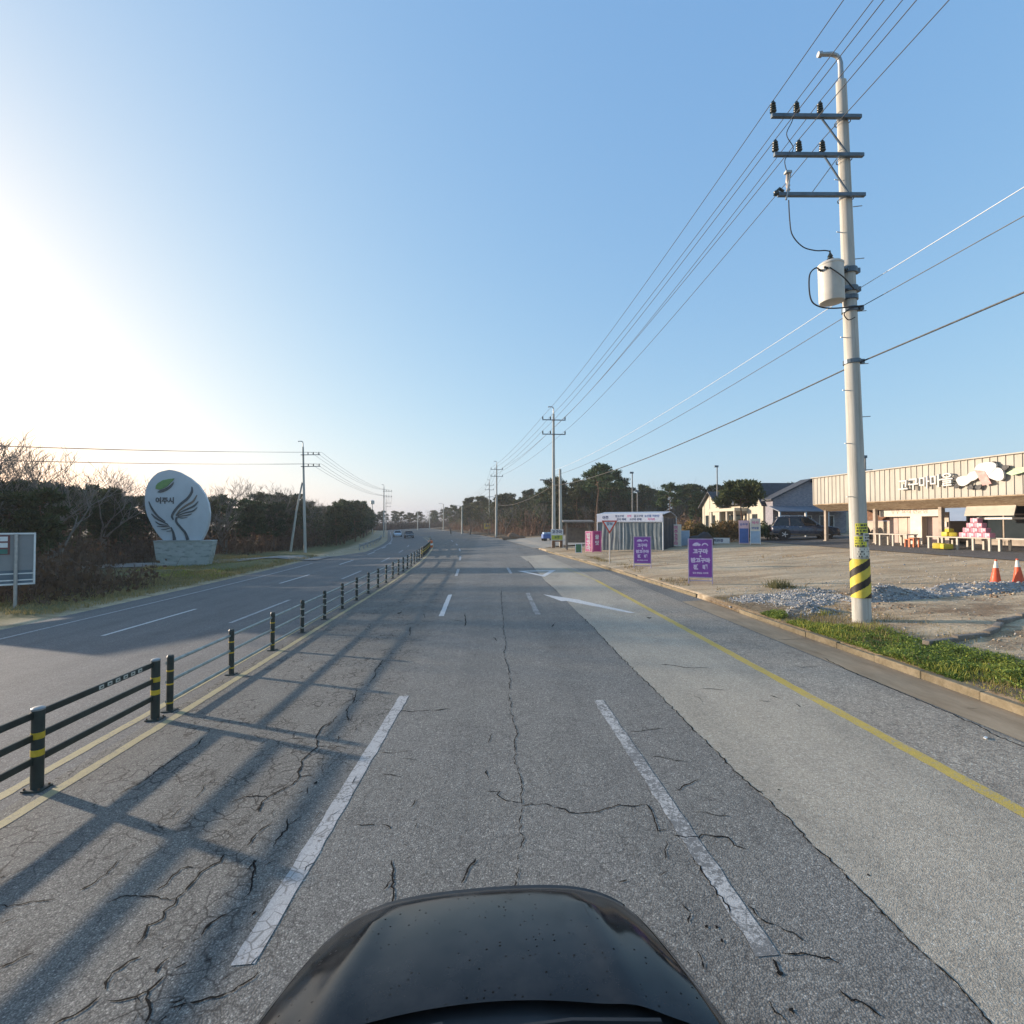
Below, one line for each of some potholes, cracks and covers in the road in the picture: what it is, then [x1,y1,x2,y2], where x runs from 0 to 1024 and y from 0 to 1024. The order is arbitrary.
crack [230,660,443,898]
crack [485,590,745,912]
crack [123,738,203,792]
crack [54,854,259,1024]
crack [748,905,839,971]
crack [839,989,880,1016]
